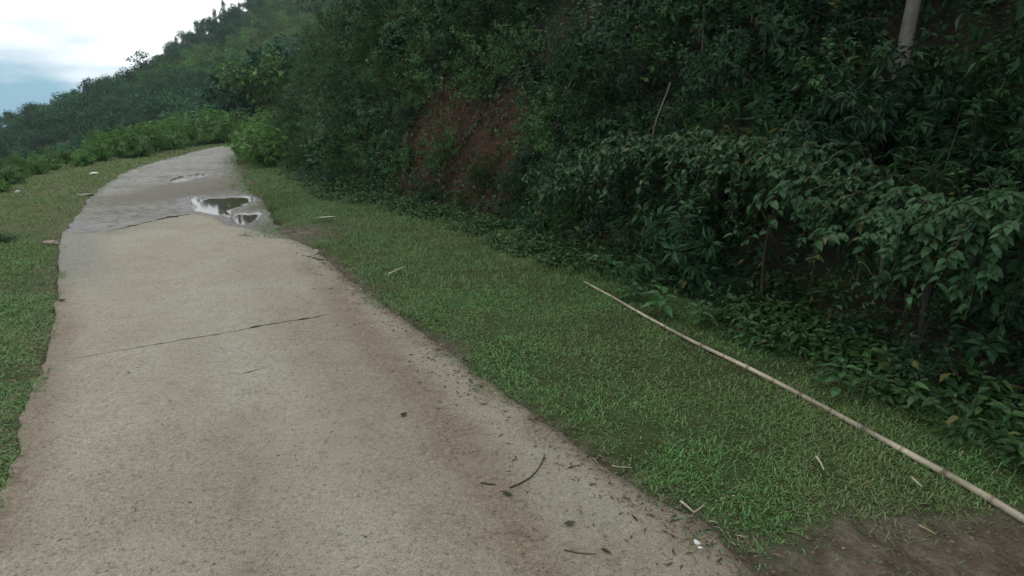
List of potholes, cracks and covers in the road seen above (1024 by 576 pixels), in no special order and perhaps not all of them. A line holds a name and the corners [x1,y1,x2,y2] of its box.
crack [102,214,189,233]
pothole [169,173,207,182]
pothole [231,212,262,225]
pothole [190,195,251,218]
